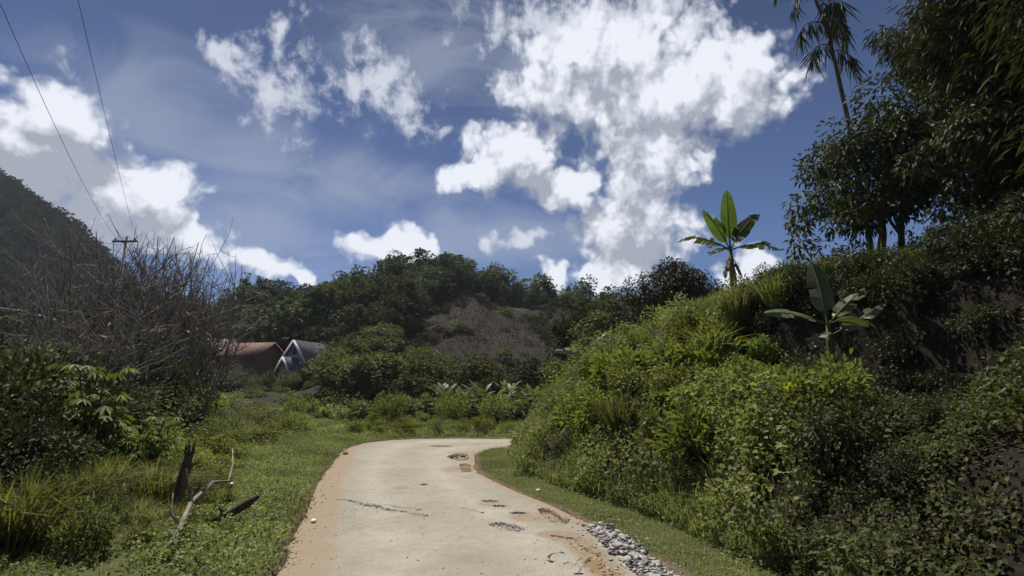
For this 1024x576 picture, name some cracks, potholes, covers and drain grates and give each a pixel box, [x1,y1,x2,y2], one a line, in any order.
pothole [458,463,474,473]
pothole [535,507,574,526]
crack [542,551,587,574]
pothole [484,521,541,534]
pothole [443,453,472,462]
